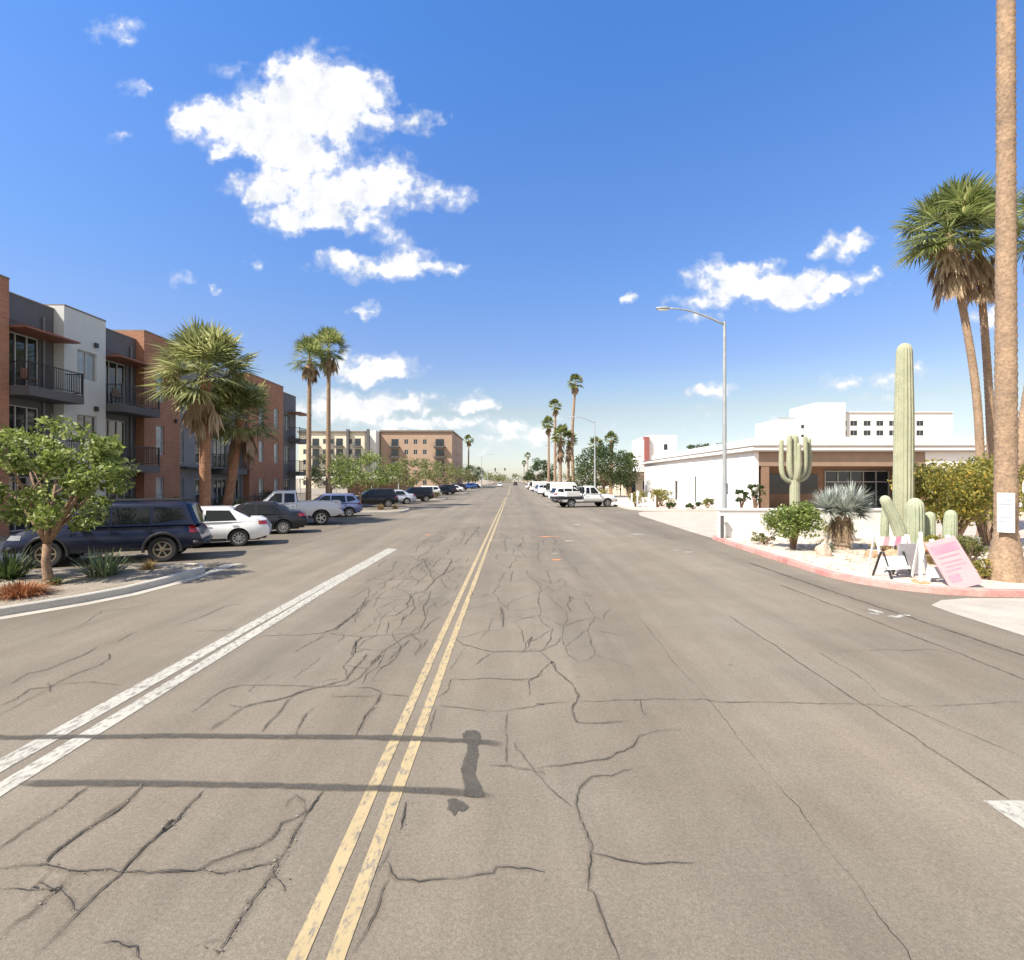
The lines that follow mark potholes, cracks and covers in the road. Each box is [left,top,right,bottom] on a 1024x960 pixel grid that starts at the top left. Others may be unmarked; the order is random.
crack [183,527,479,734]
crack [577,698,1019,715]
crack [1,634,130,714]
crack [2,784,323,960]
crack [429,533,686,959]
